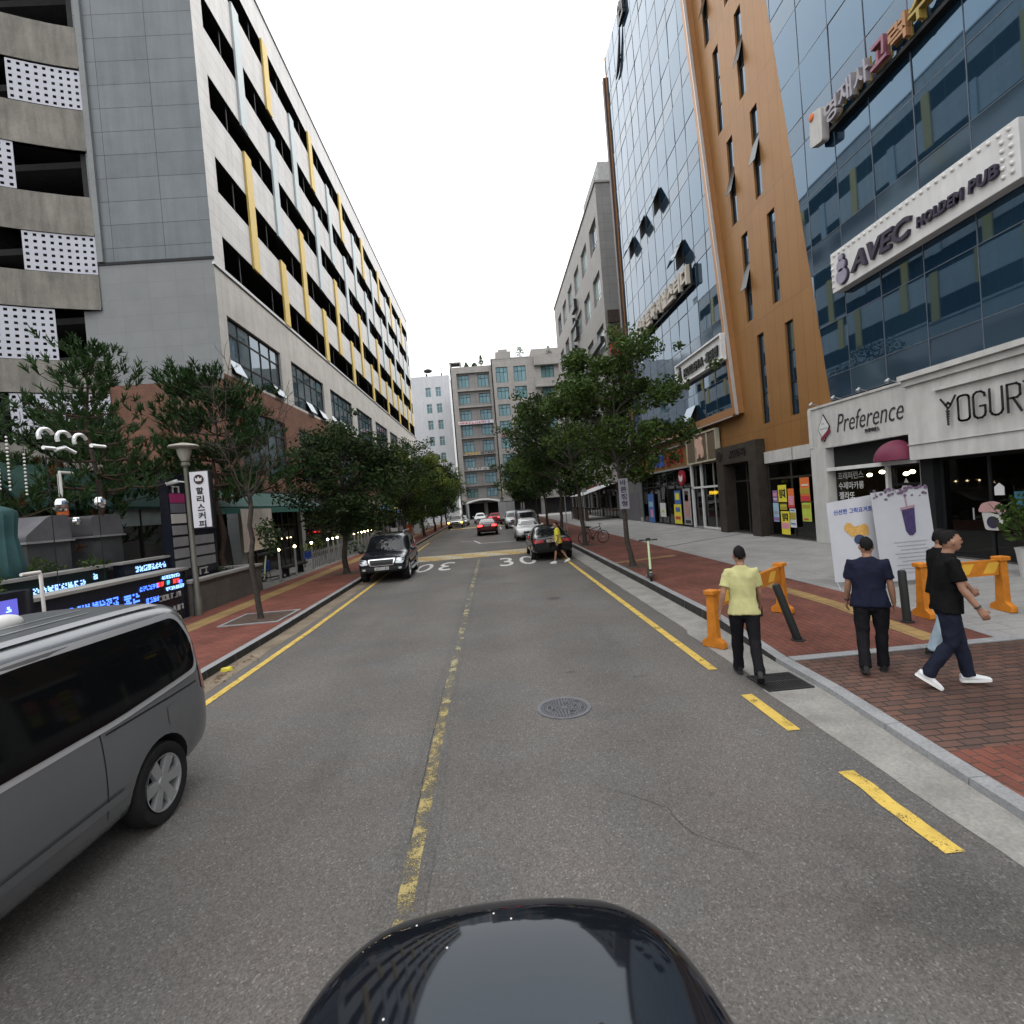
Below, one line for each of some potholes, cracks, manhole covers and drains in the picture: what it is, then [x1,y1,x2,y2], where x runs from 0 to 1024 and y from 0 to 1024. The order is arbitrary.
drain grate [746,672,815,692]
manhole cover [537,697,591,719]
